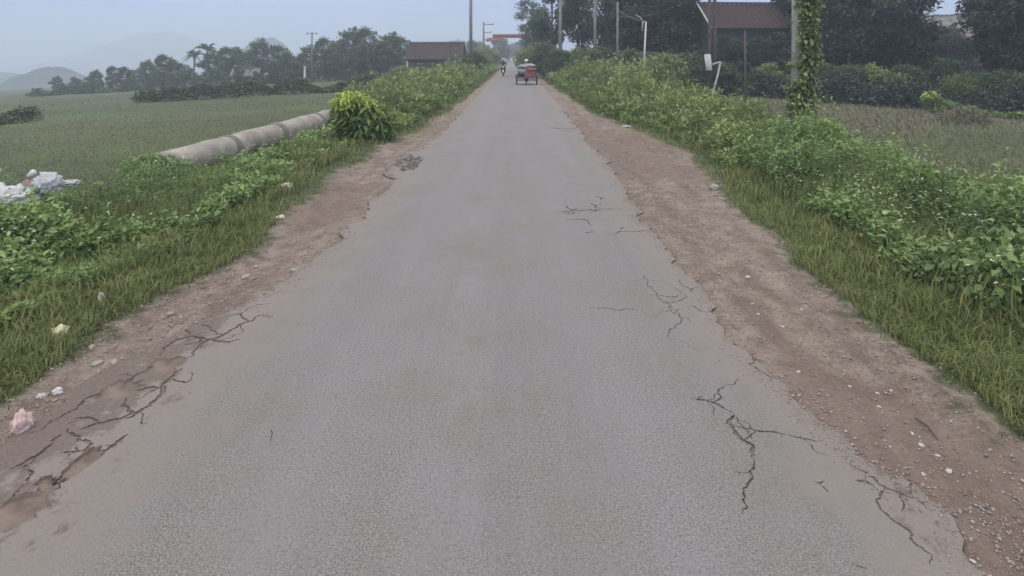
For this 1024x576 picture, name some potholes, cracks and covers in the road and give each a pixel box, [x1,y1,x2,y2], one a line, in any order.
pothole [394,155,423,172]
crack [849,462,941,564]
crack [9,304,262,496]
crack [689,357,828,513]
crack [564,196,649,235]
crack [634,275,712,351]
